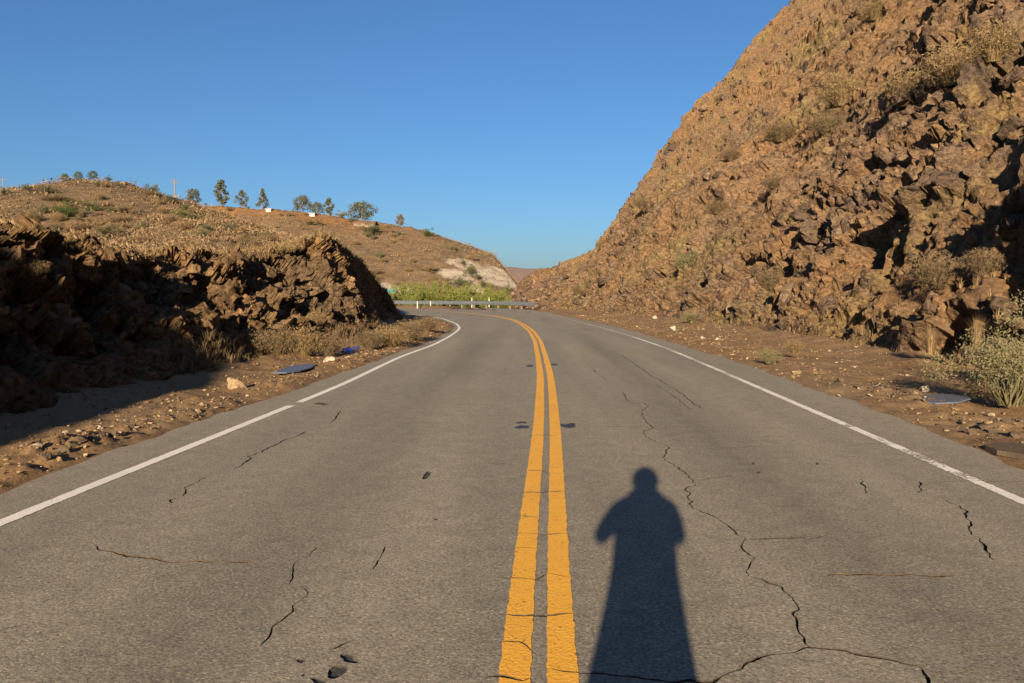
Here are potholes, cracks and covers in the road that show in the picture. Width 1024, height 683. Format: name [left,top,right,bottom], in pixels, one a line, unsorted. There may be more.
crack [234,432,305,470]
pothole [327,664,348,679]
crack [917,480,1024,561]
pothole [340,652,359,663]
crack [574,393,956,683]
crack [260,546,318,646]
